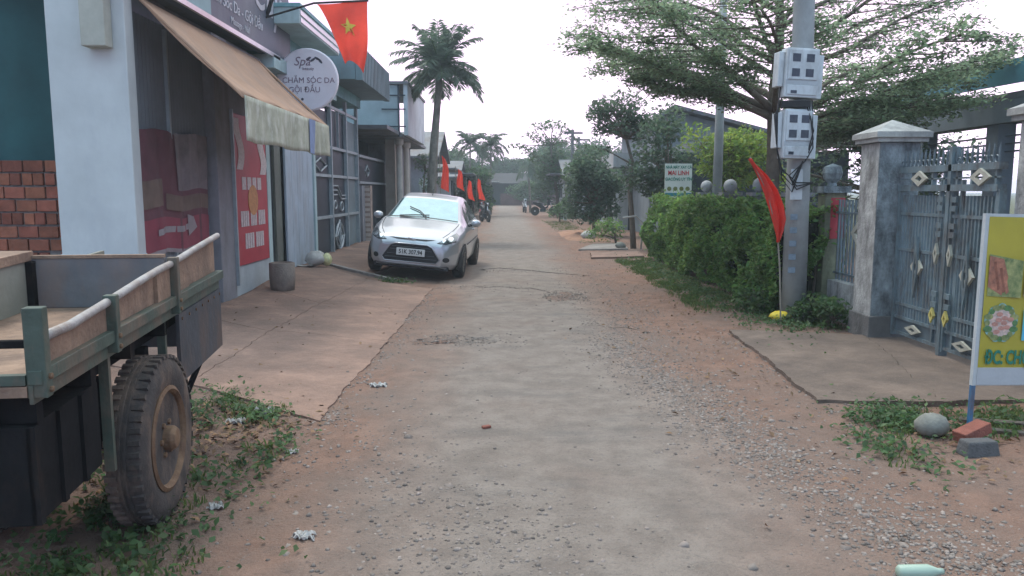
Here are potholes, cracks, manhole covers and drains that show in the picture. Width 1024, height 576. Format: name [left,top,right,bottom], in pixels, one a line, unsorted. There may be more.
crack [468,268,584,293]
pothole [536,289,596,303]
pothole [394,334,511,347]
